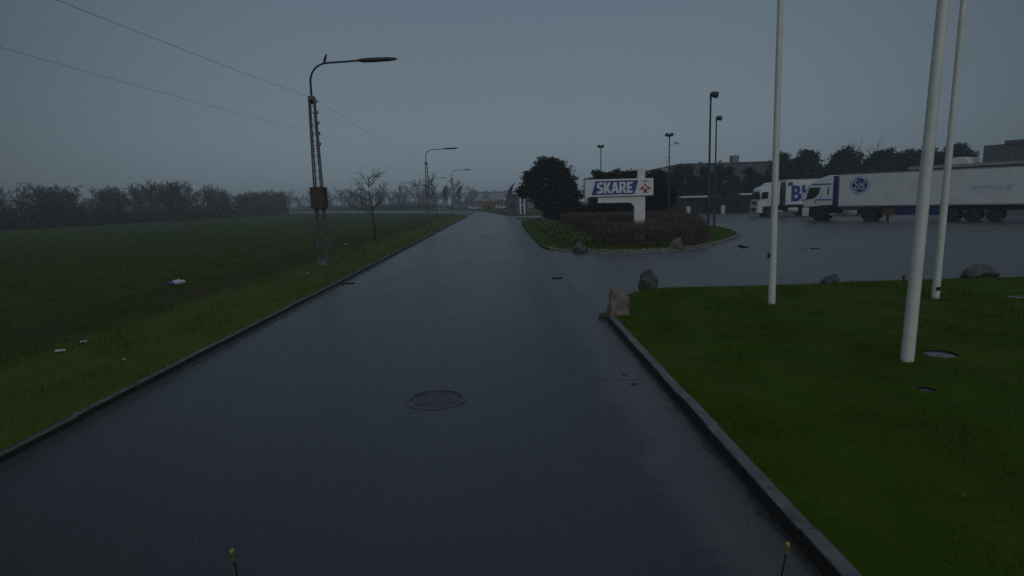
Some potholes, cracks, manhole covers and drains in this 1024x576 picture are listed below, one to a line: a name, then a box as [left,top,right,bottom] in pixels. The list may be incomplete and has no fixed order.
manhole cover [404,389,467,410]
